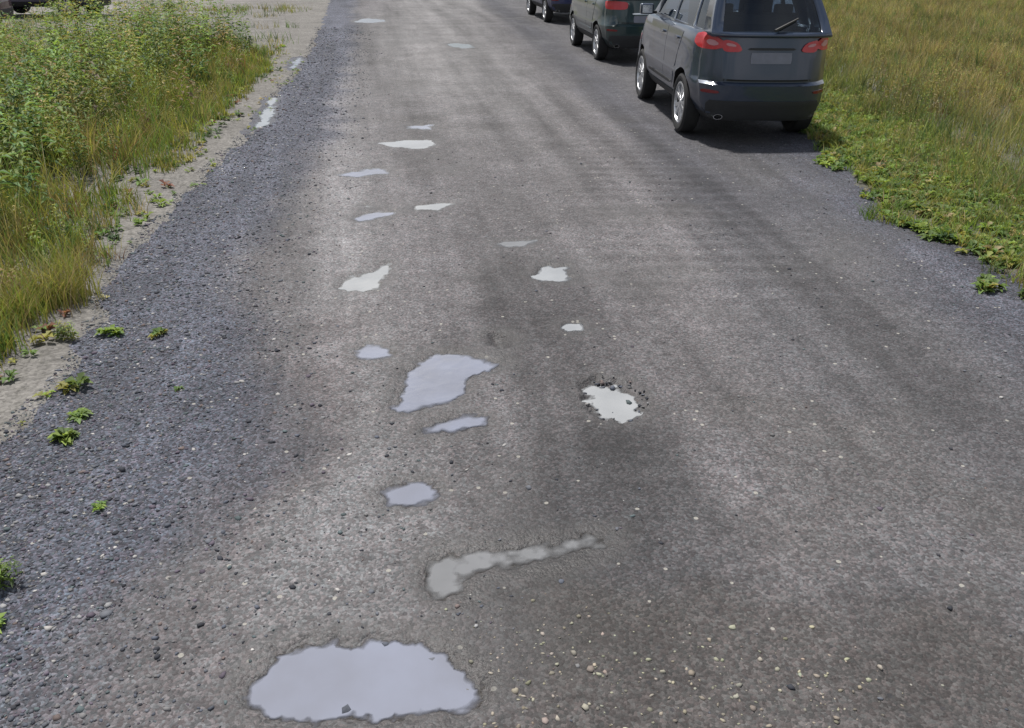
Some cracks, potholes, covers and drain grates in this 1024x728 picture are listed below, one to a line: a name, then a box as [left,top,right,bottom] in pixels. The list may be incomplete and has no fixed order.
pothole [331,165,396,179]
pothole [488,236,547,248]
pothole [328,258,398,296]
pothole [522,262,581,283]
pothole [575,372,656,425]
pothole [228,618,498,728]
pothole [368,137,441,149]
pothole [369,473,451,512]
pothole [346,338,403,362]
pothole [401,199,462,214]
pothole [413,407,498,439]
pothole [340,208,405,224]
